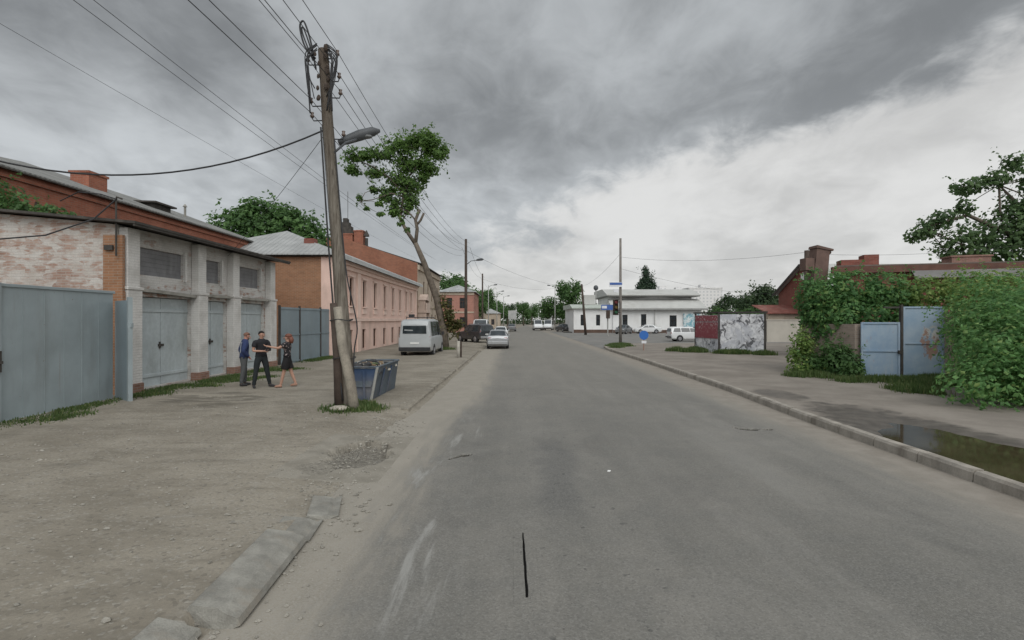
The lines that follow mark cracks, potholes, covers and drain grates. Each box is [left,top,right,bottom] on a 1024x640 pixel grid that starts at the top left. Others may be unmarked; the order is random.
pothole [725,425,786,434]
crack [513,529,541,606]
